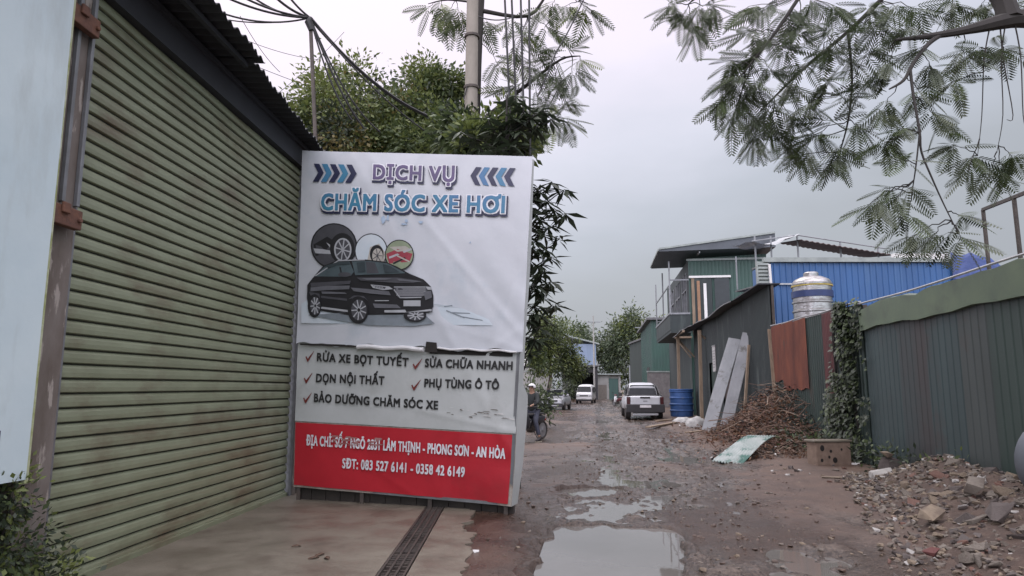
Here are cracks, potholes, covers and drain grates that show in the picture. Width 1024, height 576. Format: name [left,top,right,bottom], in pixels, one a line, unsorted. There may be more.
drain grate [376,506,444,576]
pothole [513,516,701,576]
